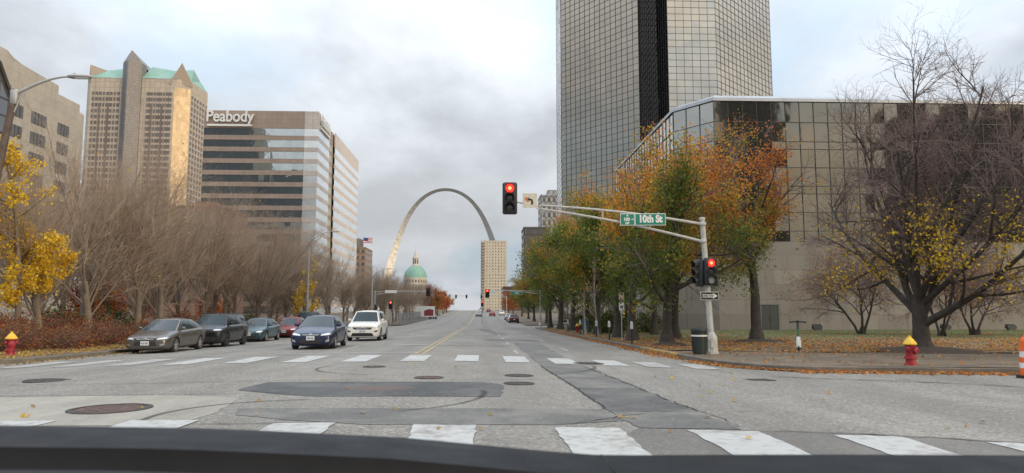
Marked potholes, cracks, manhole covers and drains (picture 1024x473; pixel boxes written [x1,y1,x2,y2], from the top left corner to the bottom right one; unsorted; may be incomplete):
manhole cover [65,403,154,414]
